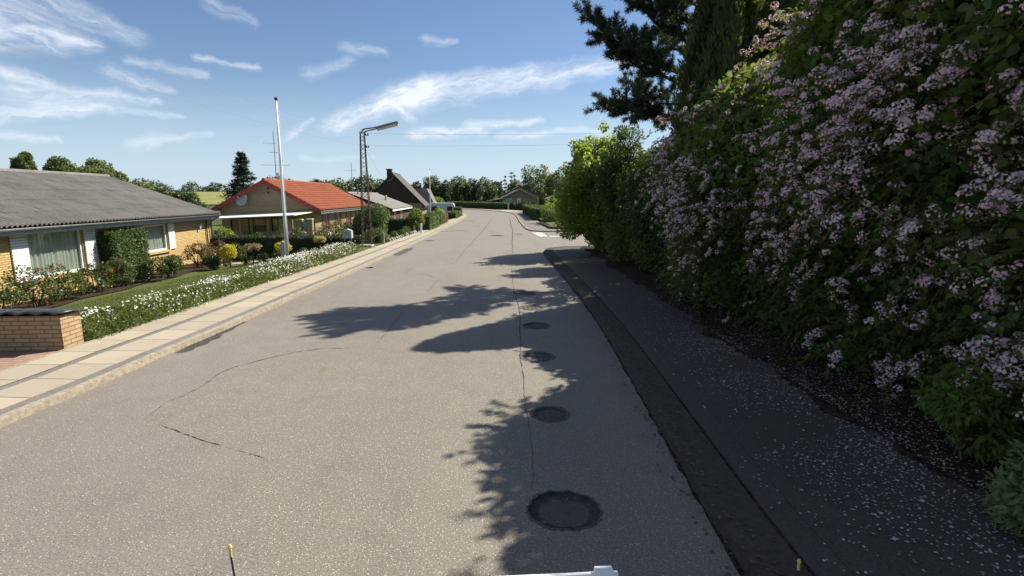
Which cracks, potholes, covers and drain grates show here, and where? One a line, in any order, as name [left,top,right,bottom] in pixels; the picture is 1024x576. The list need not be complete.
manhole cover [519,352,556,362]
manhole cover [530,406,571,422]
crack [147,316,400,462]
